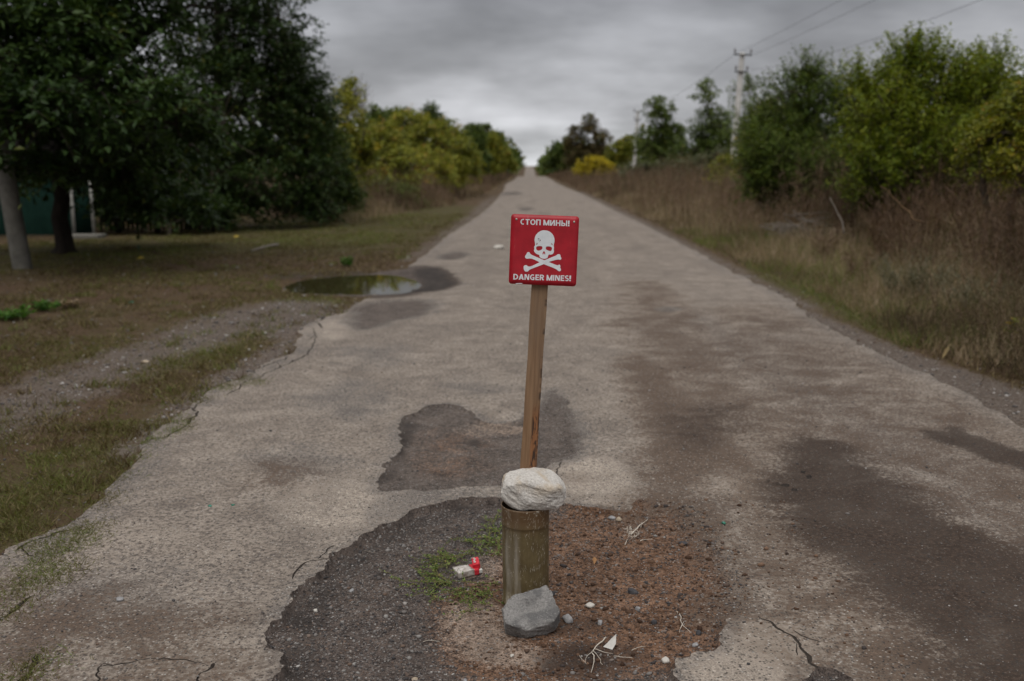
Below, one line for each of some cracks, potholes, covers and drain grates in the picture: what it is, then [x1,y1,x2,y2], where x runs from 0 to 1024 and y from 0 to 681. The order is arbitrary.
crack [95,658,215,681]
crack [758,616,821,668]
crack [227,319,323,395]
crack [292,545,335,580]
crack [16,530,68,556]
crack [163,400,205,438]
pothole [264,492,757,681]
